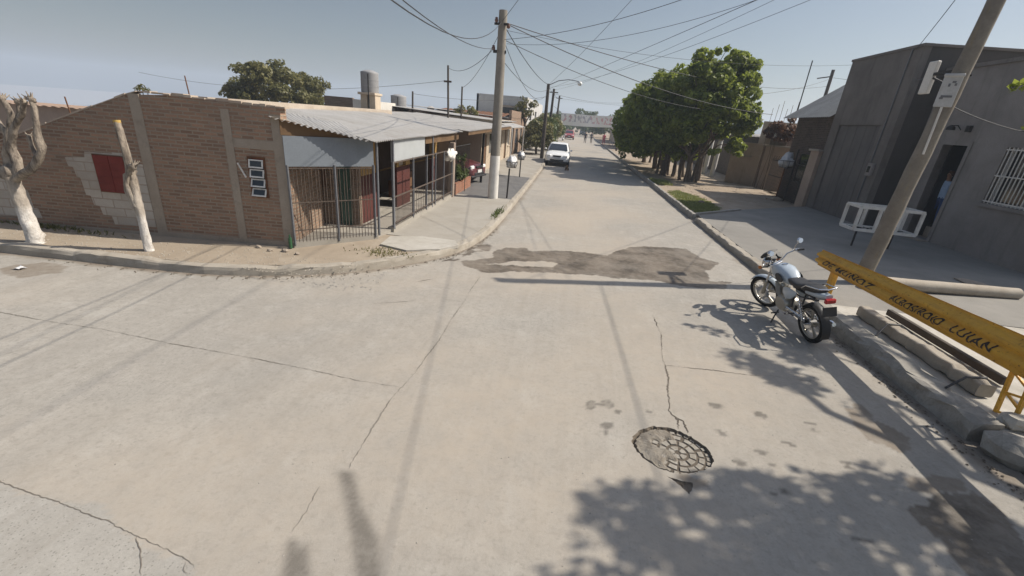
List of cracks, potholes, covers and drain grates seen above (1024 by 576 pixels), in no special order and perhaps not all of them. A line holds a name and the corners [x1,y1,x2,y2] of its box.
crack [349,279,478,468]
crack [0,481,194,574]
crack [652,315,777,432]
